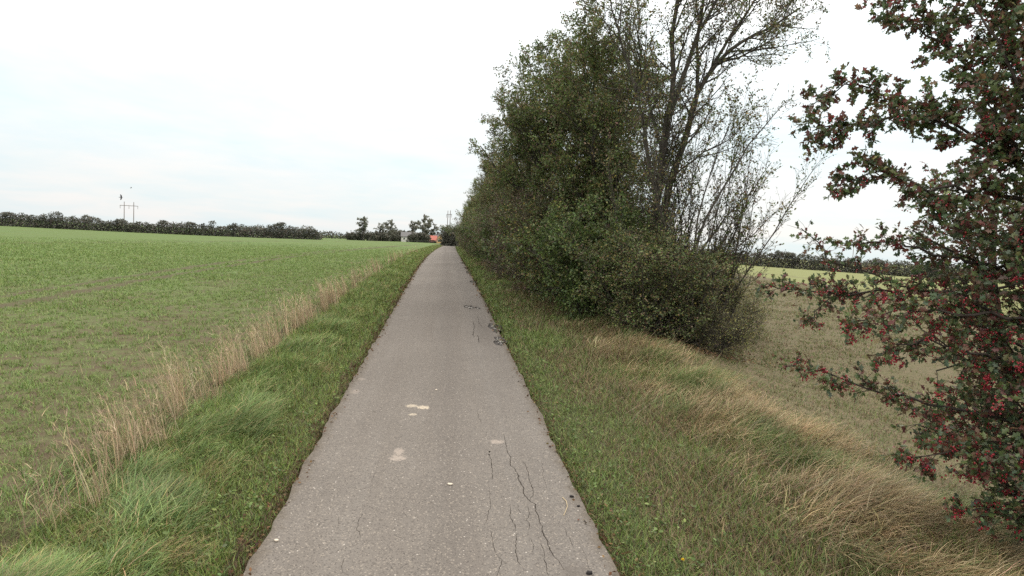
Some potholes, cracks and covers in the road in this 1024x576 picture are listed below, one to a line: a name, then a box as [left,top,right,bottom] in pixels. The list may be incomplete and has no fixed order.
crack [485,436,589,576]
